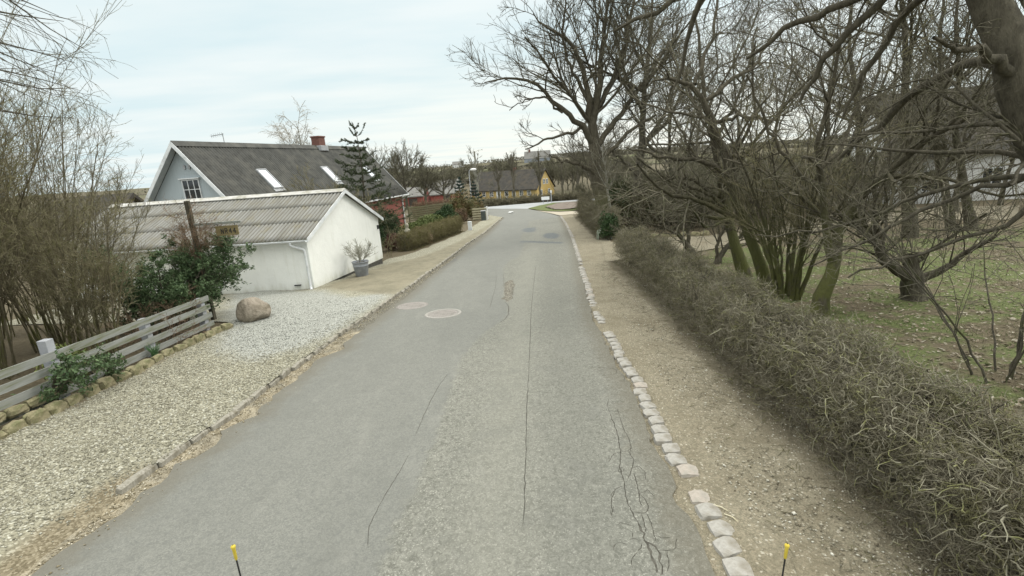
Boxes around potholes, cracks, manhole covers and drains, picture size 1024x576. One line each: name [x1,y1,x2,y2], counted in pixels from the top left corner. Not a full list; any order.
crack [607,399,677,575]
manhole cover [396,302,428,310]
manhole cover [425,309,461,319]
